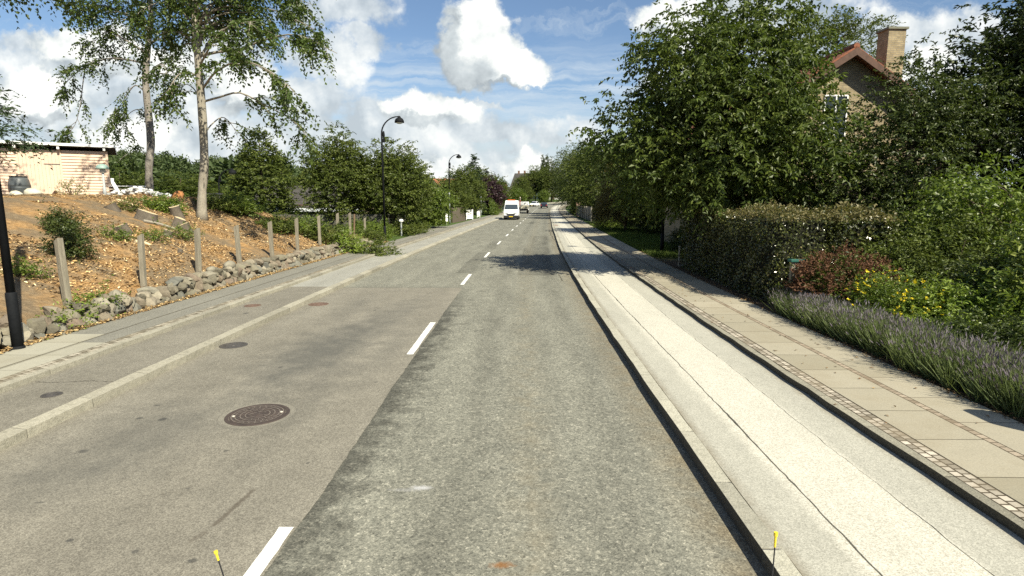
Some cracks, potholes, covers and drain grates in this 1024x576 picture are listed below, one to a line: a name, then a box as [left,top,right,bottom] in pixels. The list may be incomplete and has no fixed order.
manhole cover [224,404,290,426]
